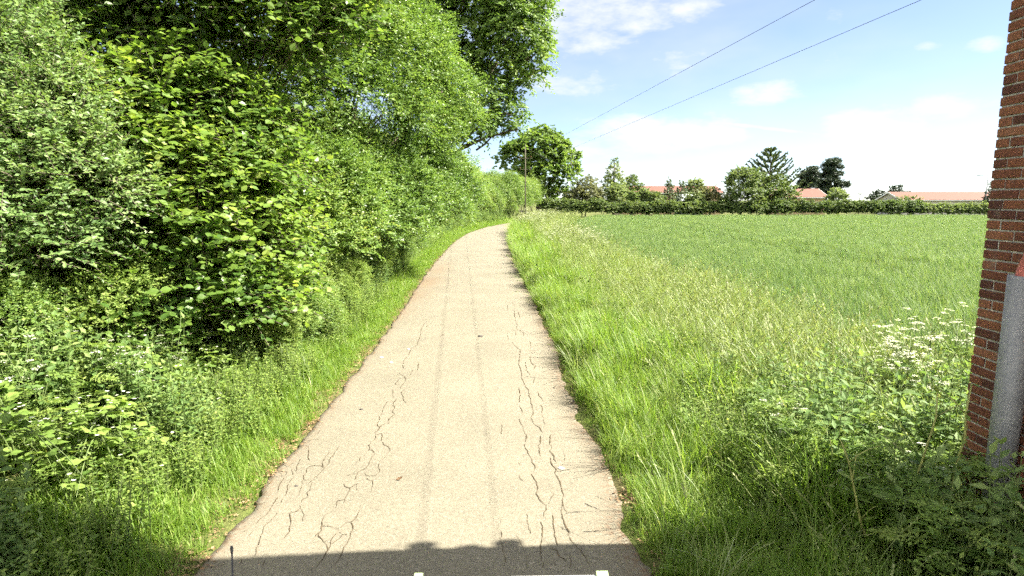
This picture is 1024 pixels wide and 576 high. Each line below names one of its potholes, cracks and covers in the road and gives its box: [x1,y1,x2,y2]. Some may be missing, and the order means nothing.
crack [316,322,426,566]
crack [500,306,589,568]
crack [239,431,339,567]
